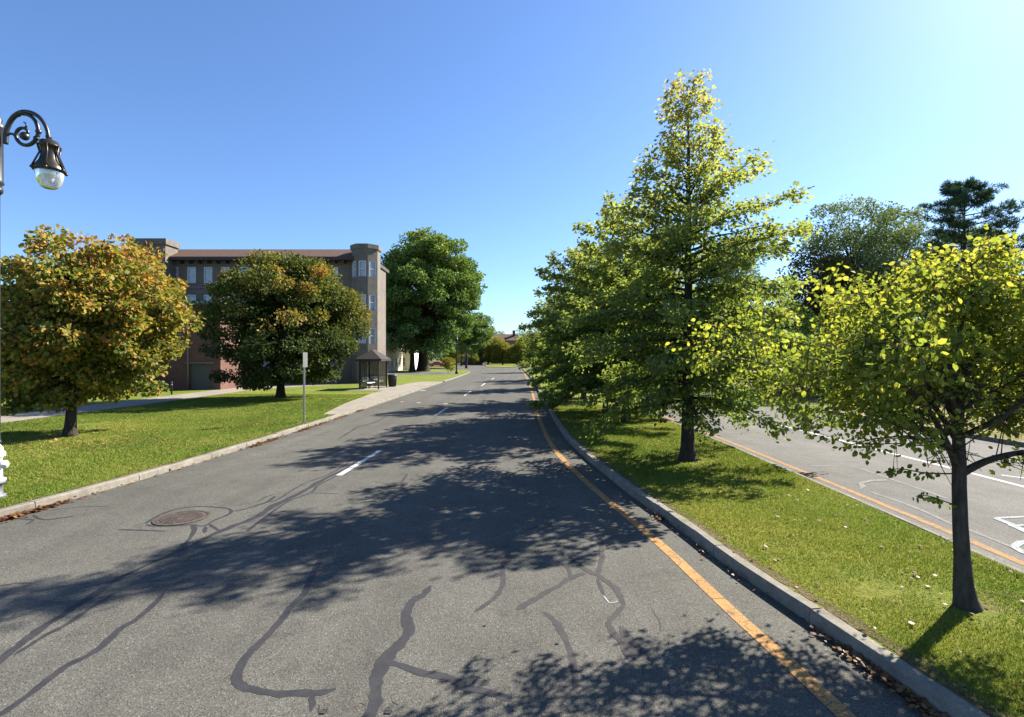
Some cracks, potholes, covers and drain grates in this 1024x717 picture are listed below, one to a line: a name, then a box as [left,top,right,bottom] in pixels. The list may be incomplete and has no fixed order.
manhole cover [152,510,210,526]
